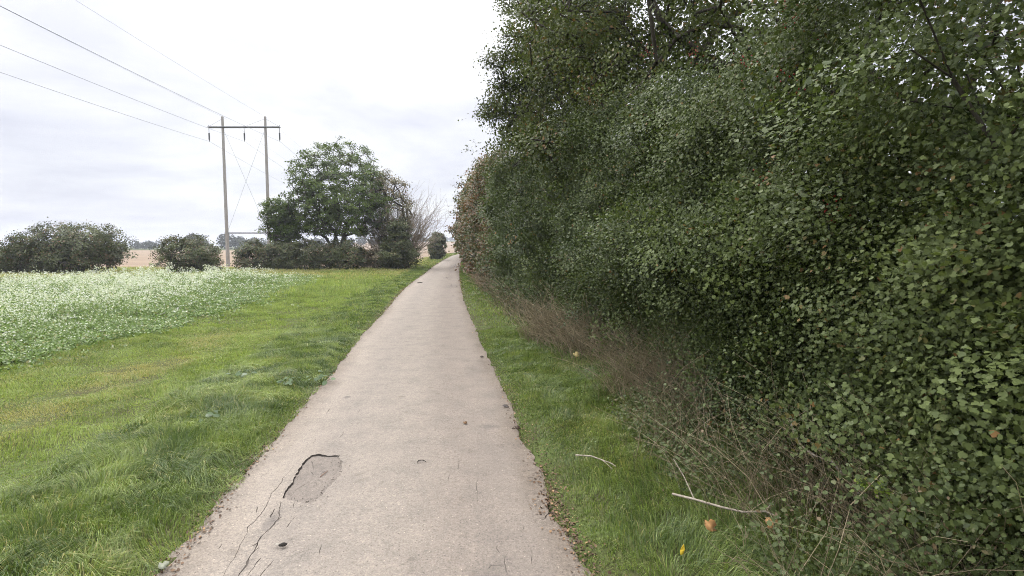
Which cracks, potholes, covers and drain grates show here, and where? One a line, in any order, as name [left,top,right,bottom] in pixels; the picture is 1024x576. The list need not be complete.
crack [219,467,296,576]
pothole [283,454,343,504]
